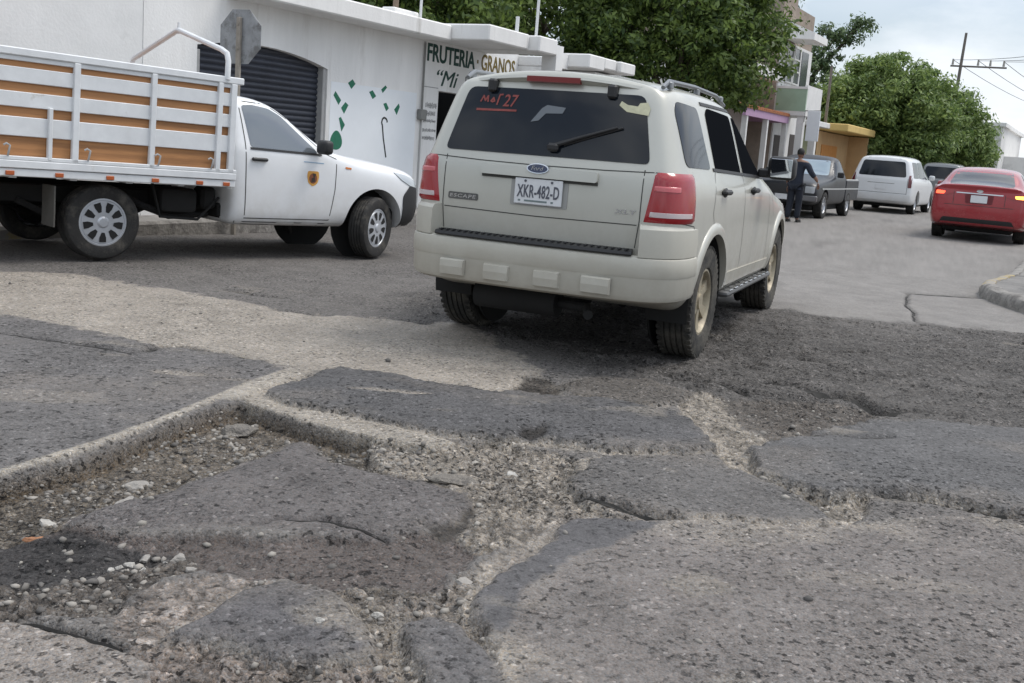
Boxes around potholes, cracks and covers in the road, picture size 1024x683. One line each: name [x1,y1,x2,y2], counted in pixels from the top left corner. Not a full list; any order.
pothole [0,554,199,623]
pothole [678,390,869,525]
crack [267,520,386,543]
pothole [367,438,635,556]
pothole [333,571,496,683]
pothole [128,640,384,683]
pothole [42,524,481,594]
crack [904,294,974,326]
